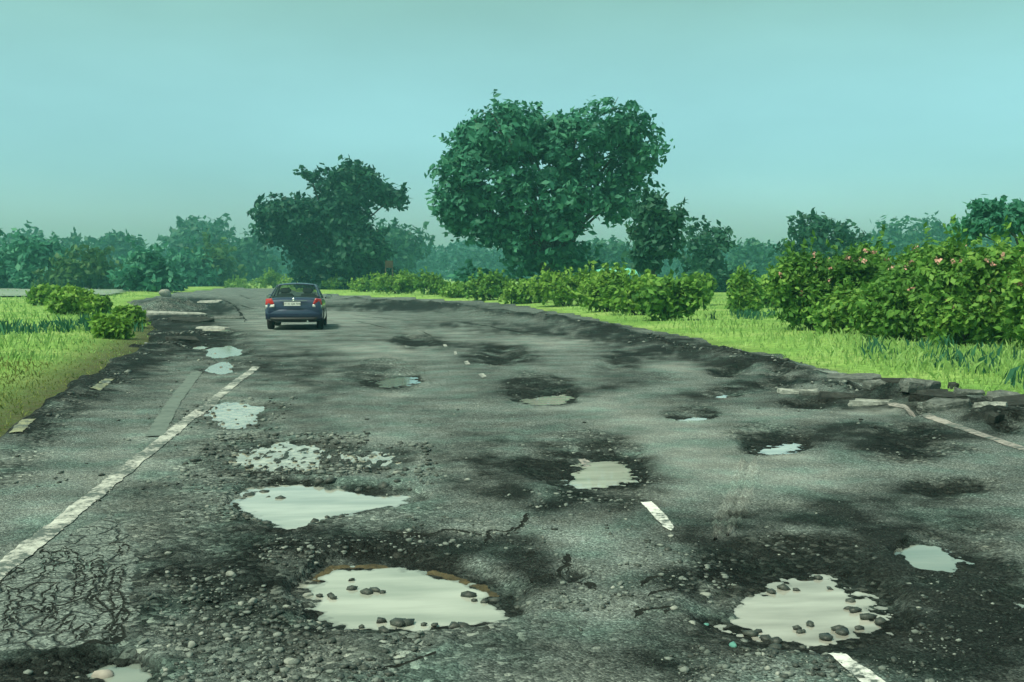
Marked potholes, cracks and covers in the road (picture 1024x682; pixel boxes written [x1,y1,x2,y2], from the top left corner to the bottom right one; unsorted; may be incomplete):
pothole [289,541,538,634]
pothole [842,379,869,393]
pothole [497,370,581,408]
pothole [230,474,430,534]
crack [0,513,142,651]
pothole [714,420,825,457]
pothole [505,428,661,512]
pothole [332,357,432,393]
pothole [768,397,838,411]
pothole [658,403,722,422]
pothole [667,526,922,661]
